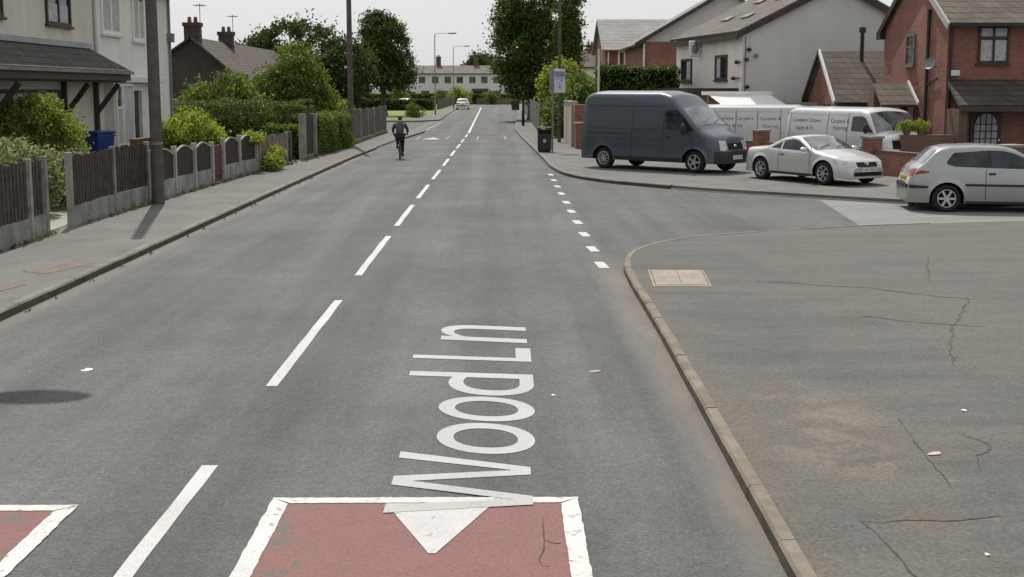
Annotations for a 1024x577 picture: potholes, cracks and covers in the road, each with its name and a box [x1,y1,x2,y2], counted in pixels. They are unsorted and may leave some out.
manhole cover [648,270,712,286]
crack [898,418,953,489]
crack [539,523,553,567]
manhole cover [19,259,94,275]
crack [861,515,1002,577]
